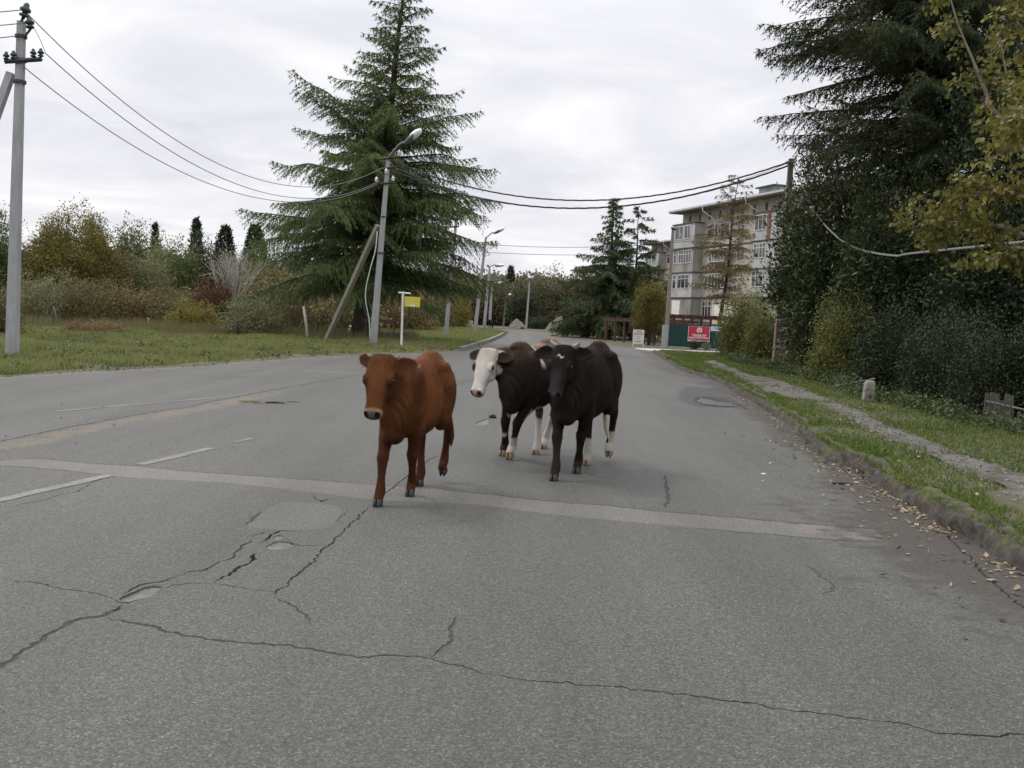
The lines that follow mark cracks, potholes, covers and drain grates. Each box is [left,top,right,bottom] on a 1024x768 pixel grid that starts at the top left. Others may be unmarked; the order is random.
pothole [119,586,162,602]
pothole [265,541,296,549]
crack [445,476,889,543]
crack [0,512,1024,738]
